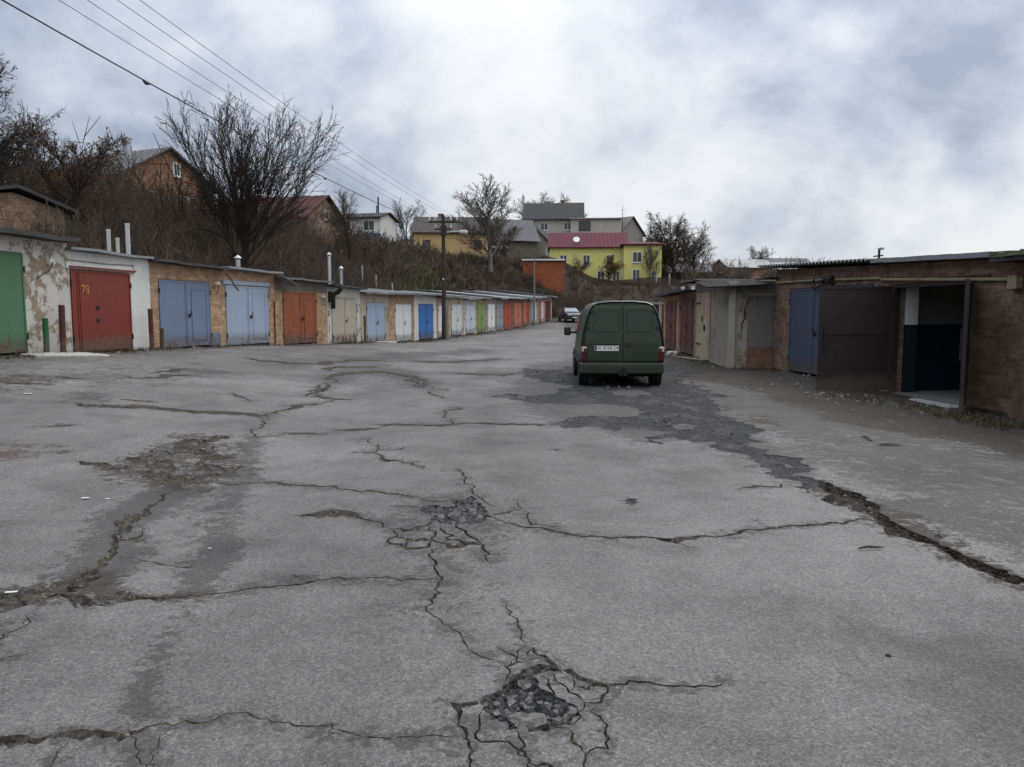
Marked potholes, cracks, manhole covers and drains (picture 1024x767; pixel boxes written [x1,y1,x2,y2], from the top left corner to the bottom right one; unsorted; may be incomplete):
pothole [480,664,578,733]
crack [0,358,874,767]
